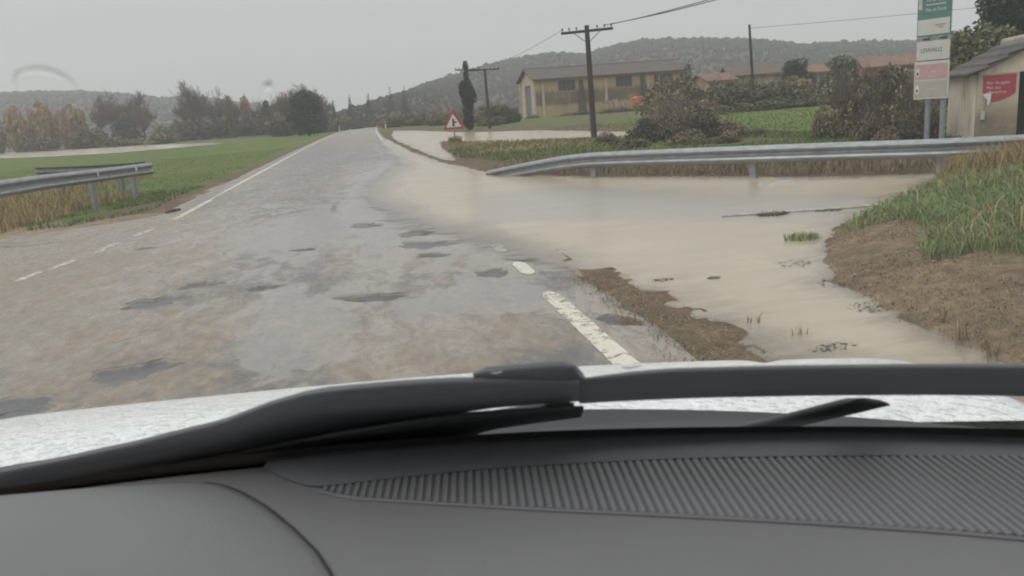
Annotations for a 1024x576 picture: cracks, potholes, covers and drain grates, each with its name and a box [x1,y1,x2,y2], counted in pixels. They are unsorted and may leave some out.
pothole [398,229,438,238]
pothole [0,393,60,419]
pothole [176,281,228,291]
pothole [120,294,200,310]
pothole [475,267,509,278]
pothole [86,358,192,383]
pothole [332,292,410,302]
